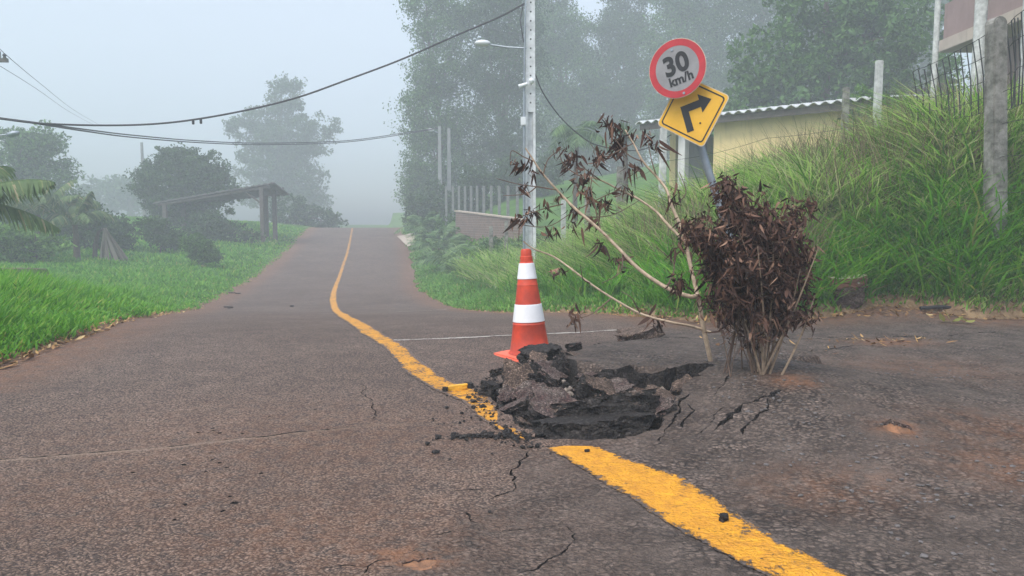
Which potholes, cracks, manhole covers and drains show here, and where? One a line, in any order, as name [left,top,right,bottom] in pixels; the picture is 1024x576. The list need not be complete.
crack [650,375,791,450]
crack [318,447,576,576]
pothole [882,419,912,434]
pothole [496,358,714,438]
pothole [400,557,437,571]
crack [0,385,381,460]
